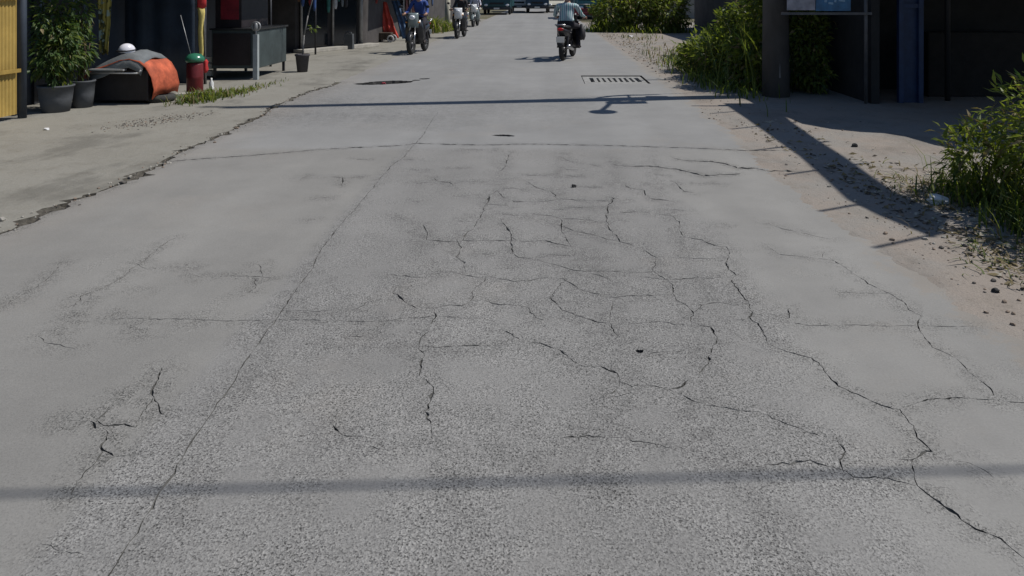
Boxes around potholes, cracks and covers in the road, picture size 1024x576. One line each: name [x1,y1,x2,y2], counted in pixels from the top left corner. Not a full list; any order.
crack [69,368,166,494]
crack [75,238,175,305]
crack [125,310,375,322]
crack [708,228,1024,558]
crack [171,143,792,176]
crack [333,243,819,451]
